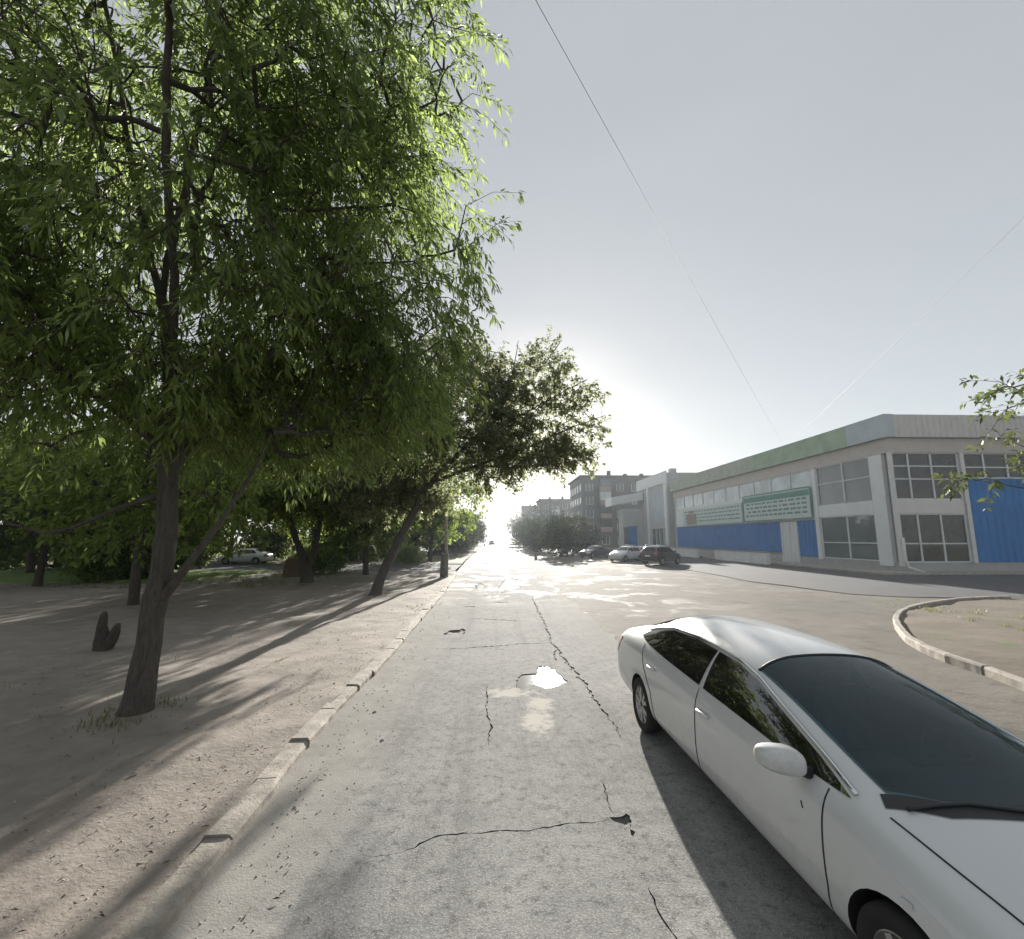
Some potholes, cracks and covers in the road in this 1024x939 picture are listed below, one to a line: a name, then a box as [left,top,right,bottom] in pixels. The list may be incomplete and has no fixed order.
crack [648,888,677,939]
pothole [612,814,635,837]
crack [453,597,625,741]
crack [381,821,599,856]
